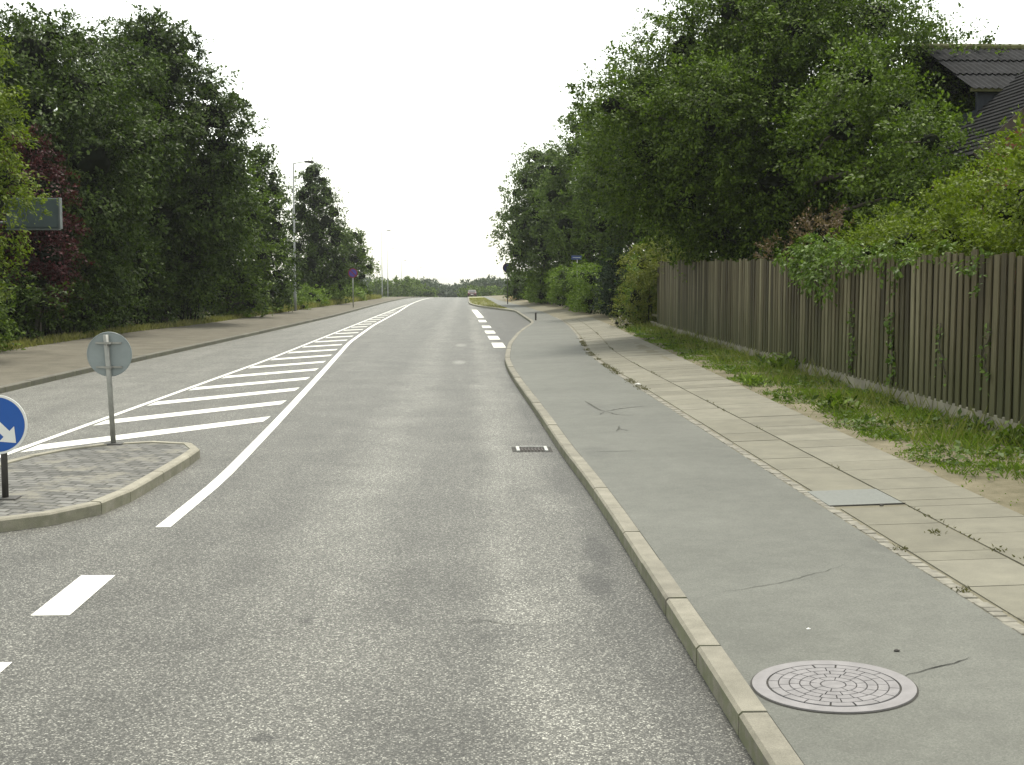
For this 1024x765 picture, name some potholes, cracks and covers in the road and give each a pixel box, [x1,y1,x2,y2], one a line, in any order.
utility cover [807,489,905,507]
manhole cover [750,660,919,714]
